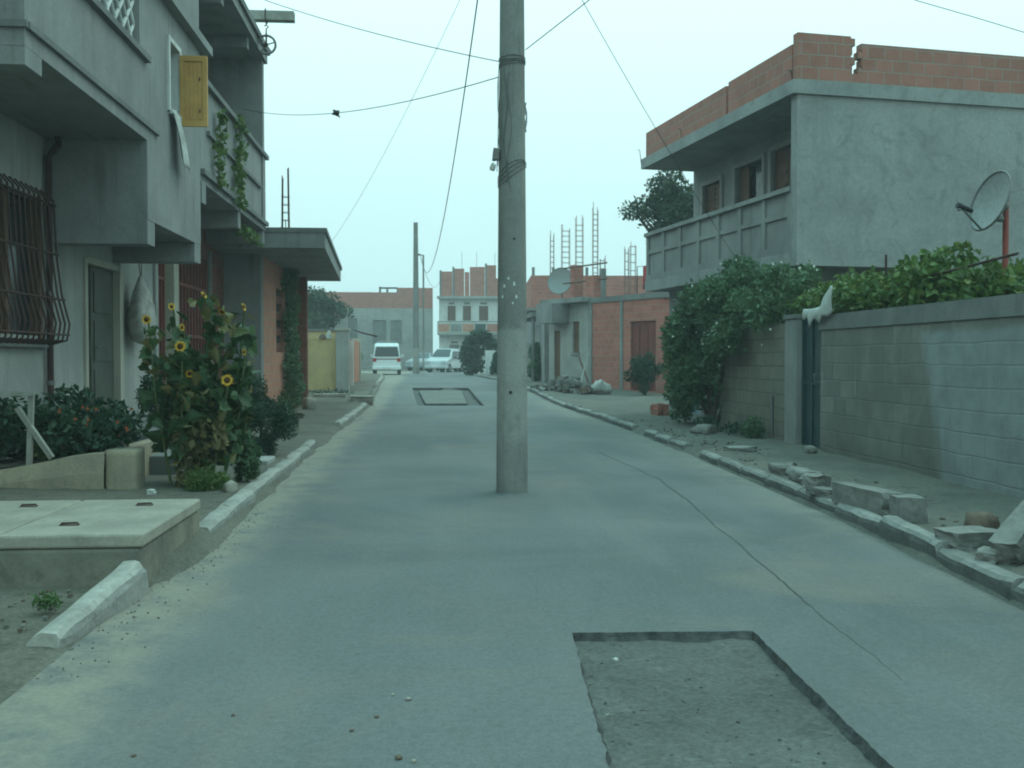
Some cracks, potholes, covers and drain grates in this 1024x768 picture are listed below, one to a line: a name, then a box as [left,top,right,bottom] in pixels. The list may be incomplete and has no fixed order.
crack [597,451,902,680]
pothole [572,631,894,768]
pothole [412,388,485,406]
